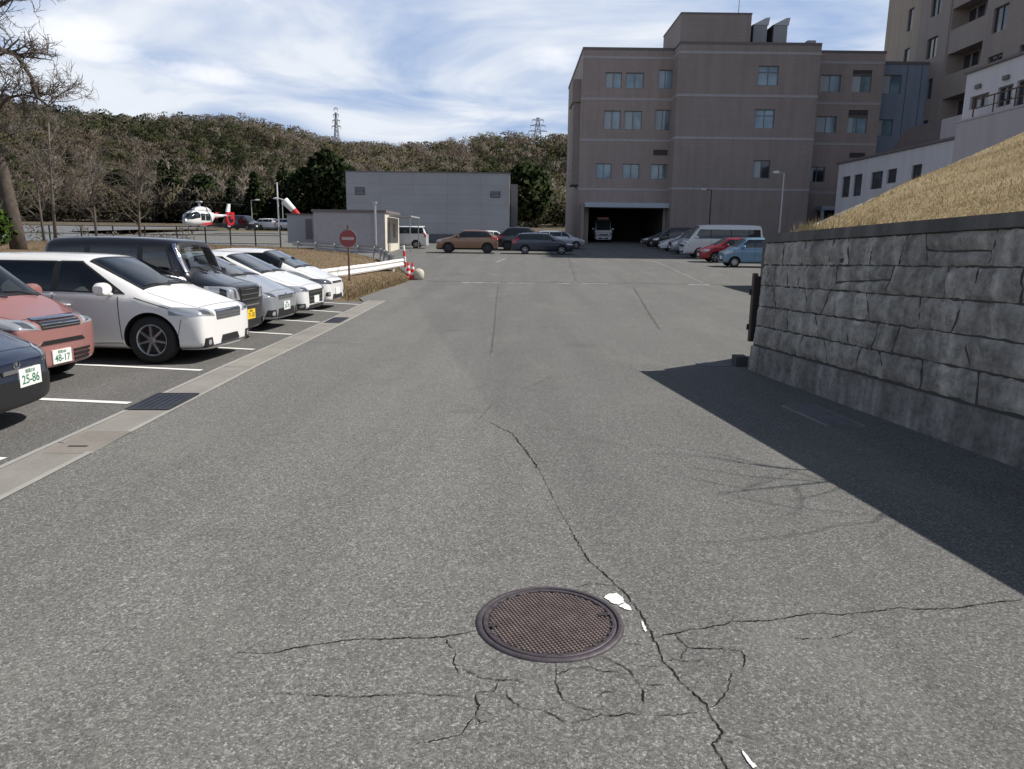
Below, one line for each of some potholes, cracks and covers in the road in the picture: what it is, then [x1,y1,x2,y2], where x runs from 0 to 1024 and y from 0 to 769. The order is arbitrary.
crack [238,474,1023,769]
manhole cover [476,586,624,663]
crack [478,407,539,469]
drain grate [124,393,199,410]
